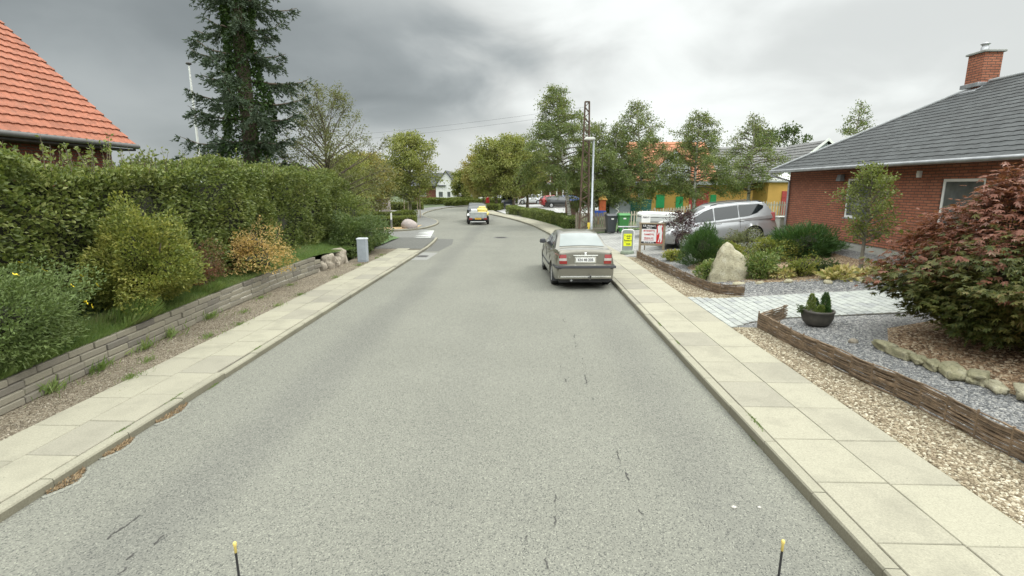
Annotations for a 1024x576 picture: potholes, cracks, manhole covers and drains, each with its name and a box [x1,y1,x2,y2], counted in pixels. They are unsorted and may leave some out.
crack [560,308,661,567]
crack [107,515,164,575]
